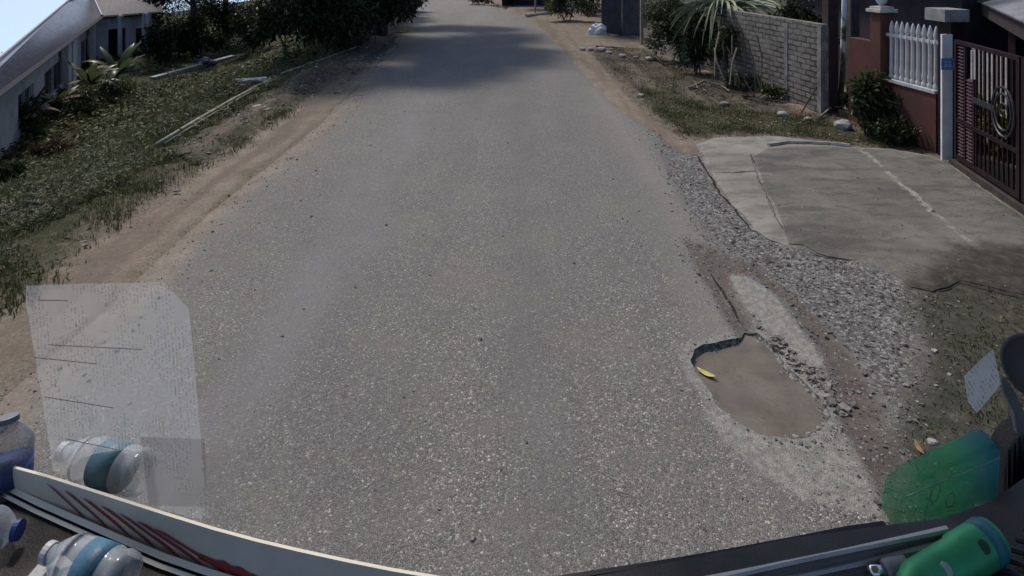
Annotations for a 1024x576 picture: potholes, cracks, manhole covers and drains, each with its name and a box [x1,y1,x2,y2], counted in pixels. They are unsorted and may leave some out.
pothole [691,333,831,439]
crack [697,153,783,235]
crack [710,274,740,323]
